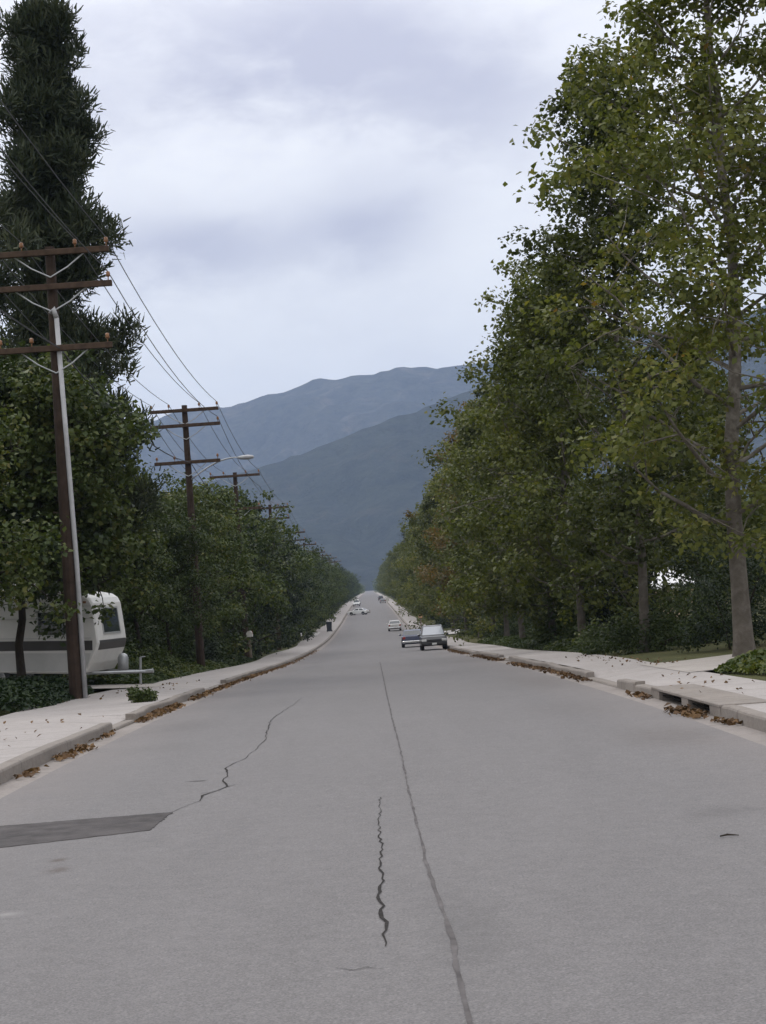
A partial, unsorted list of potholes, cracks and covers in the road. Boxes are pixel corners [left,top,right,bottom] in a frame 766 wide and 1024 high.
crack [376,797,389,946]
crack [177,706,291,810]
drain grate [651,684,766,718]
